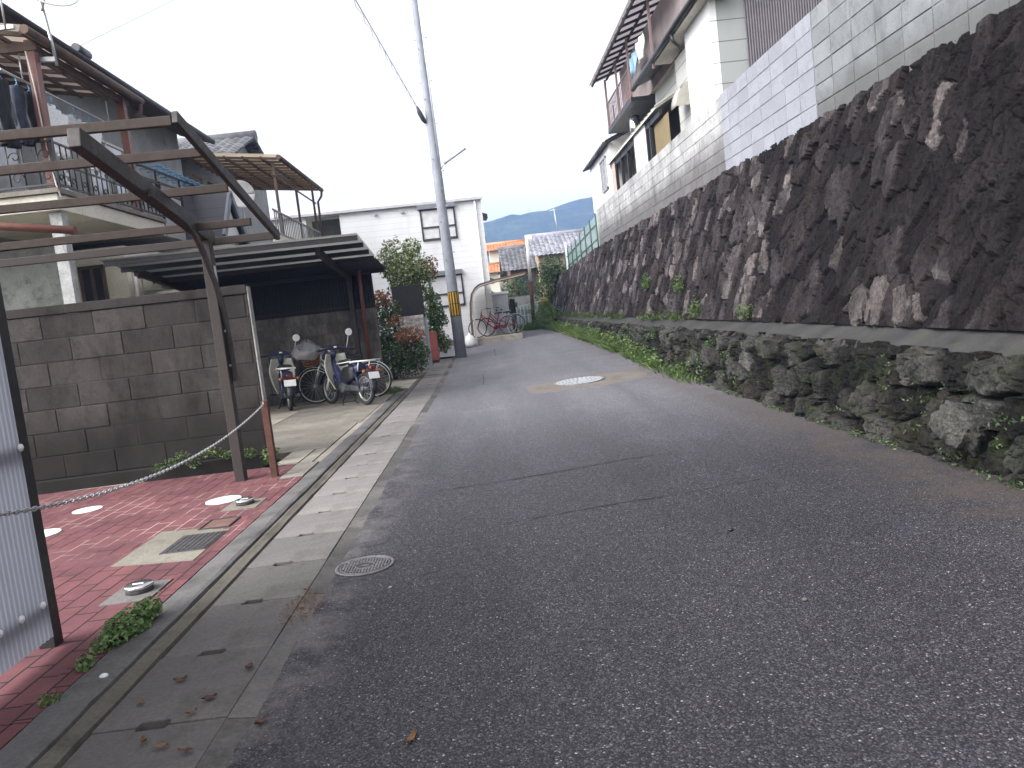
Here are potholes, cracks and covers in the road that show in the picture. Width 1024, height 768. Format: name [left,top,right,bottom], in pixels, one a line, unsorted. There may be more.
manhole cover [335,555,395,577]
manhole cover [554,376,605,386]
